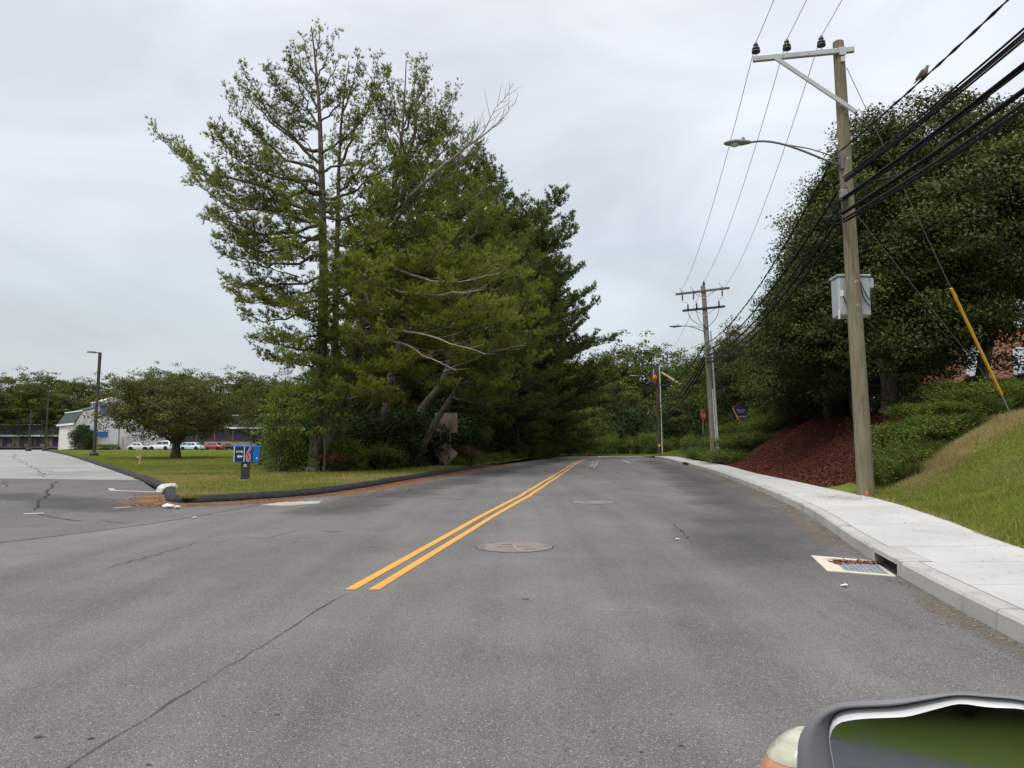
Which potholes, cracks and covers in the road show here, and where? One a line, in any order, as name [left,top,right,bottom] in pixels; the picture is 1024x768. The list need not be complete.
crack [14,453,79,521]
manhole cover [475,542,554,553]
drain grate [811,546,932,577]
